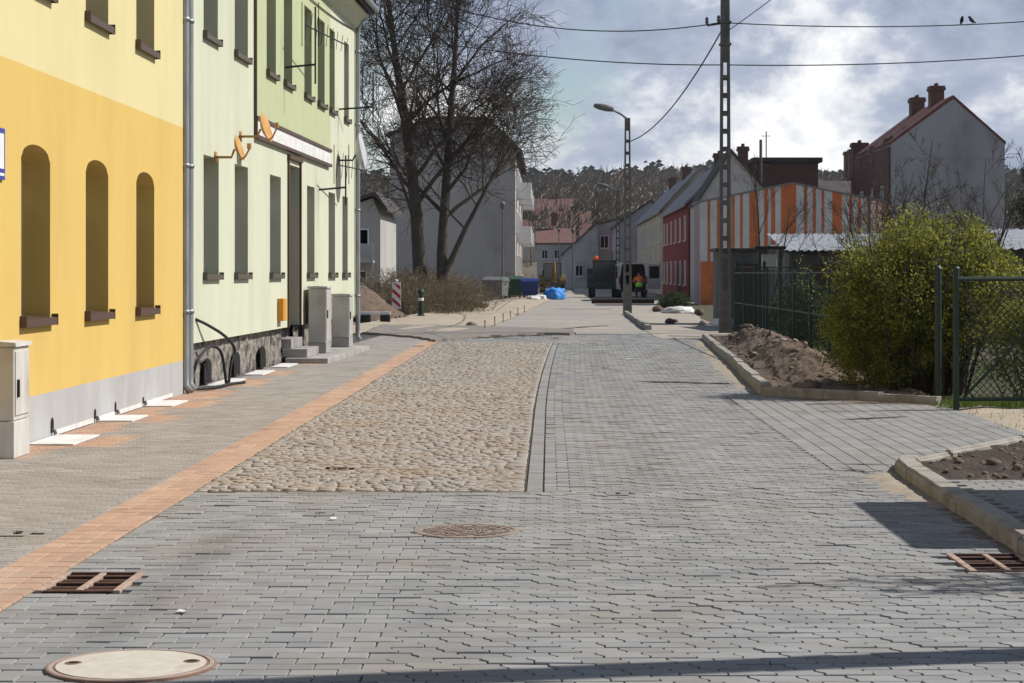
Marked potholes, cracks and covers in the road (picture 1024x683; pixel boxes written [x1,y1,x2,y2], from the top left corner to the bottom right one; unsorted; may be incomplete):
drain grate [946,553,1024,573]
manhole cover [45,649,216,683]
drain grate [34,572,145,594]
manhole cover [414,524,519,539]
